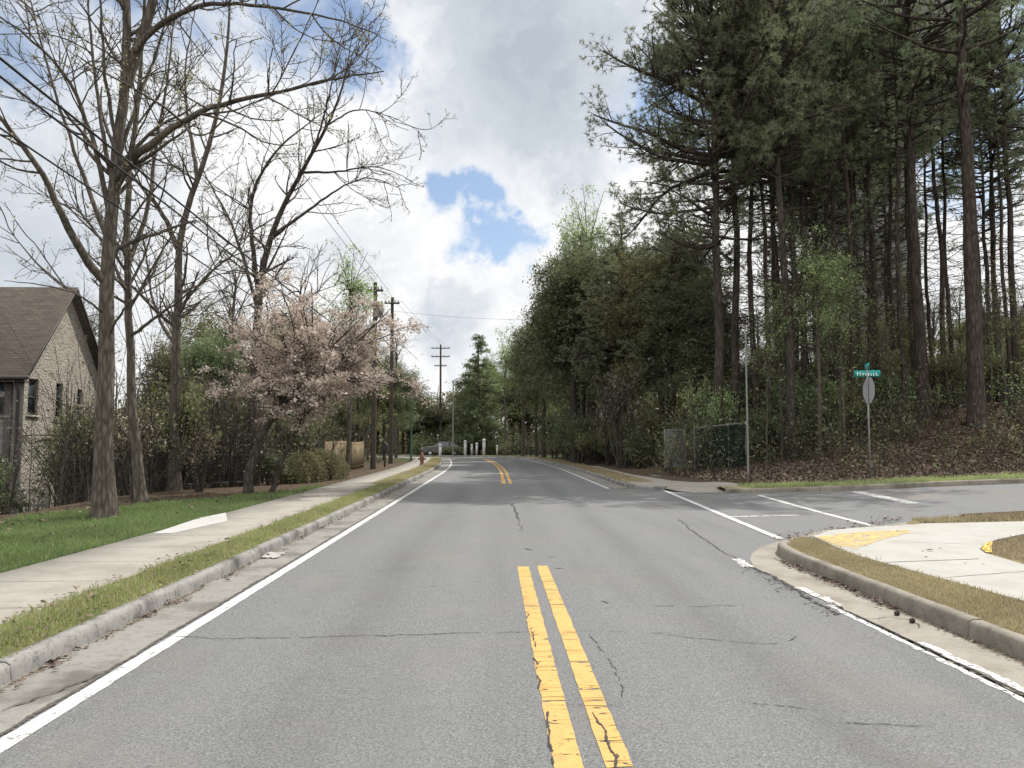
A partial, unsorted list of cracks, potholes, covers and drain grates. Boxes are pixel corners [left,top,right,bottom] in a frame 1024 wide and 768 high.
crack [185,611,796,766]
crack [744,701,918,726]
